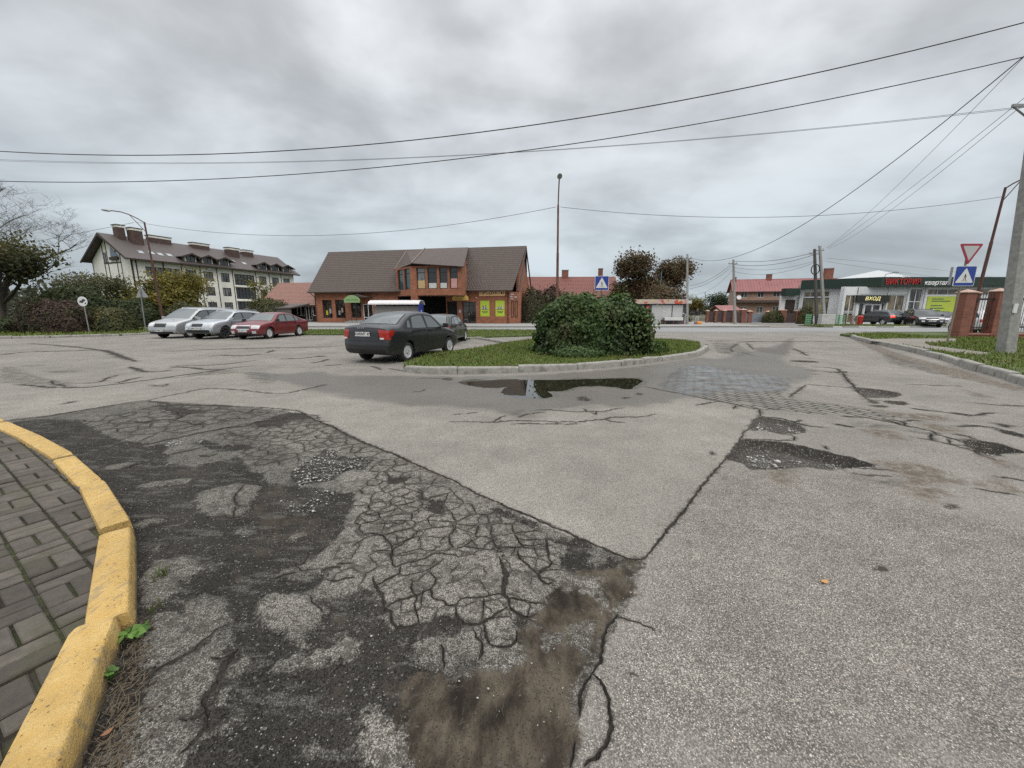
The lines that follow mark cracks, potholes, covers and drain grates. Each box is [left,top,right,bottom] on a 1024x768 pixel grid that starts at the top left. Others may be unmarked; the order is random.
pothole [748,417,805,434]
crack [3,344,341,471]
crack [570,614,654,768]
crack [222,417,567,668]
crack [151,625,239,754]
crack [454,408,654,424]
pothole [725,439,875,470]
pothole [962,440,1024,456]
pothole [854,388,901,398]
crack [730,341,1016,459]
